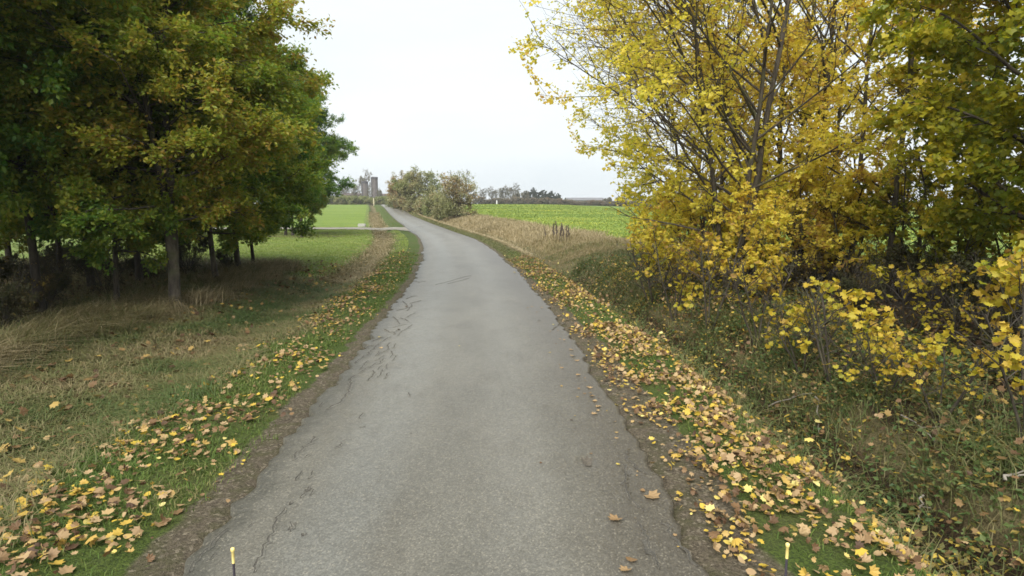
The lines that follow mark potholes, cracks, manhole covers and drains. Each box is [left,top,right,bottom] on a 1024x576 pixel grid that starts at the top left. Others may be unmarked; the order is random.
crack [248,276,469,572]
